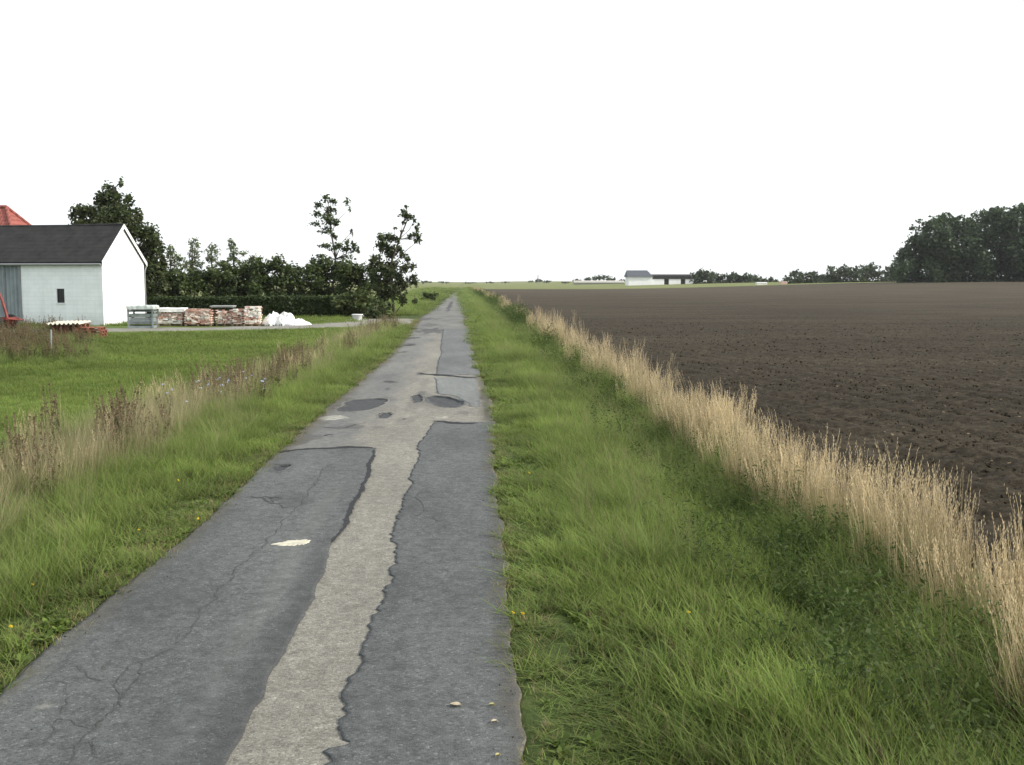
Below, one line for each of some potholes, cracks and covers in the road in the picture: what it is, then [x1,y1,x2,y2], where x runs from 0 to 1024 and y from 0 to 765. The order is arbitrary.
crack [27,423,376,765]
pothole [334,398,390,412]
pothole [424,395,468,408]
